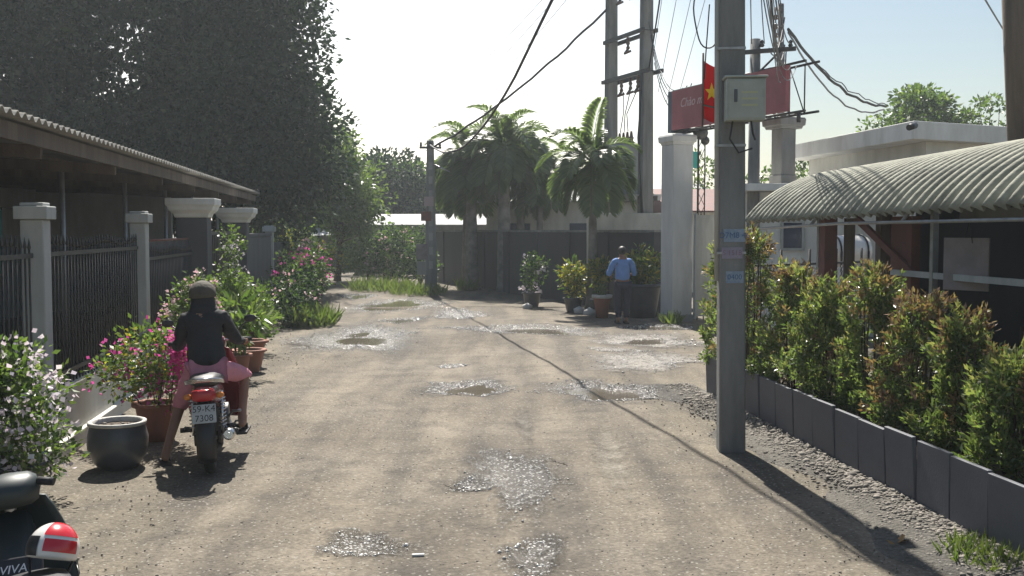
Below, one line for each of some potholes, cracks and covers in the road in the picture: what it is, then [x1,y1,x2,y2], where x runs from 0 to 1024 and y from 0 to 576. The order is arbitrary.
pothole [339,298,450,313]
pothole [588,332,704,349]
pothole [527,378,669,405]
pothole [420,378,519,397]
pothole [497,533,563,576]
pothole [436,323,609,336]
pothole [463,448,570,522]
pothole [316,528,409,557]
pothole [281,321,421,355]
pothole [434,307,489,319]
